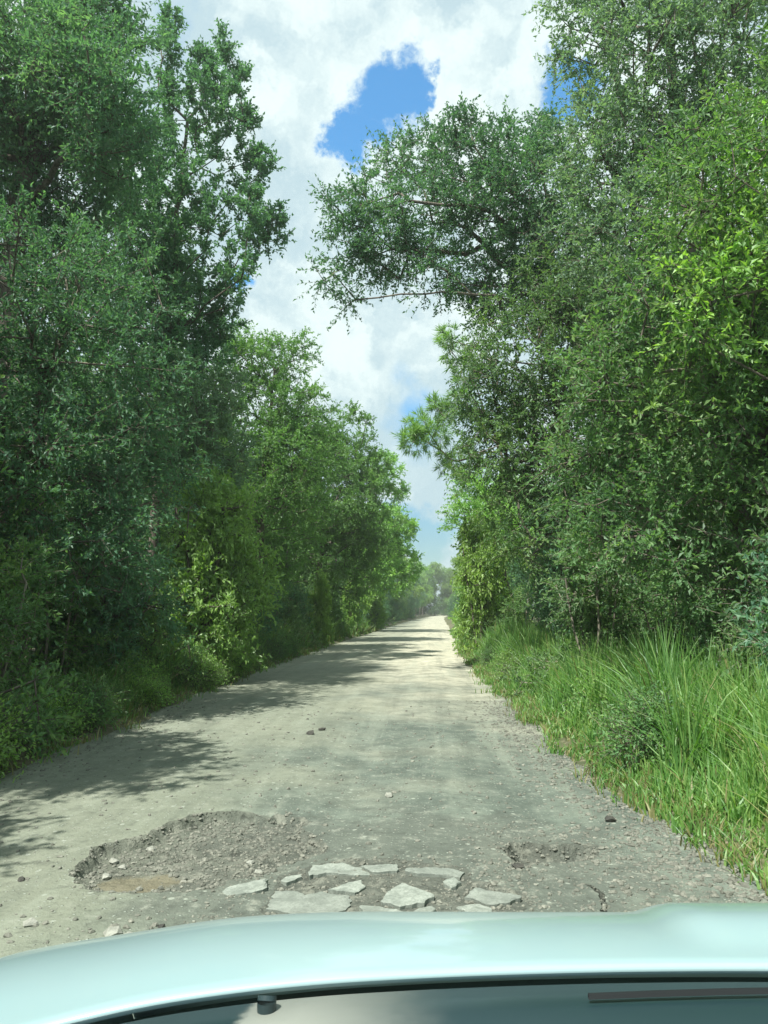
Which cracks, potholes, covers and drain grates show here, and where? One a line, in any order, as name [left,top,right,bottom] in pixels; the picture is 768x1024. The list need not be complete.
pothole [502,841,600,867]
crack [585,884,608,912]
pothole [68,810,328,894]
